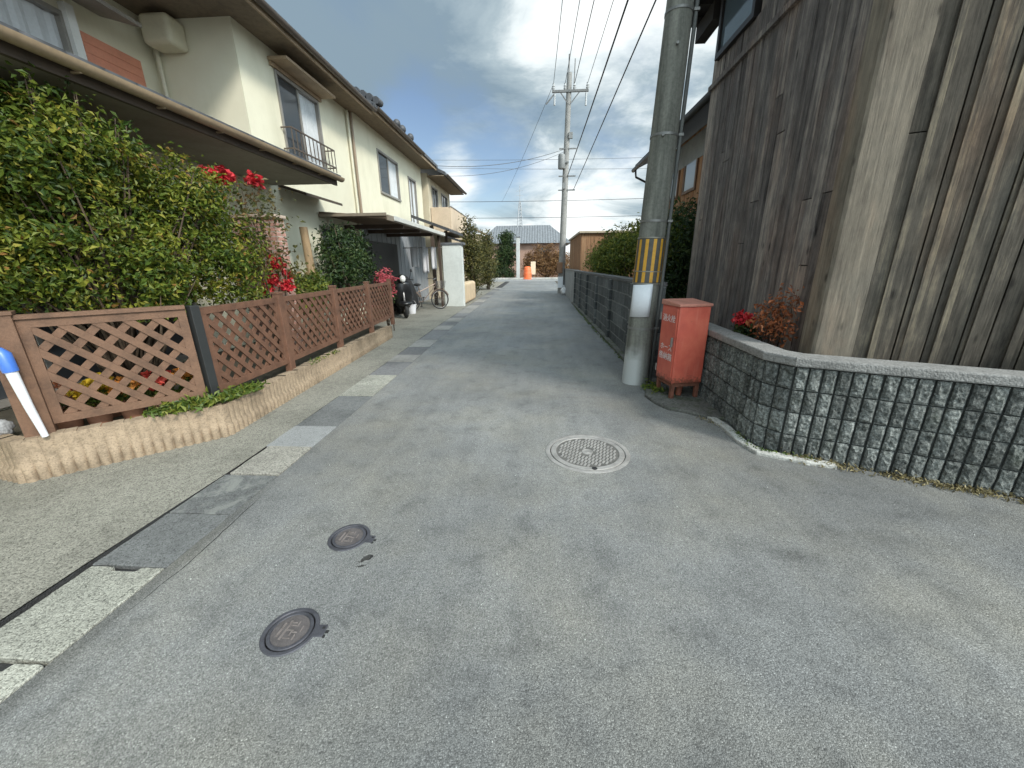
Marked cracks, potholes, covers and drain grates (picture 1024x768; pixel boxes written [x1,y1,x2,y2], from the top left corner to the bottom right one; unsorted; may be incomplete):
manhole cover [259,608,329,657]
manhole cover [327,524,377,551]
manhole cover [546,434,631,474]
